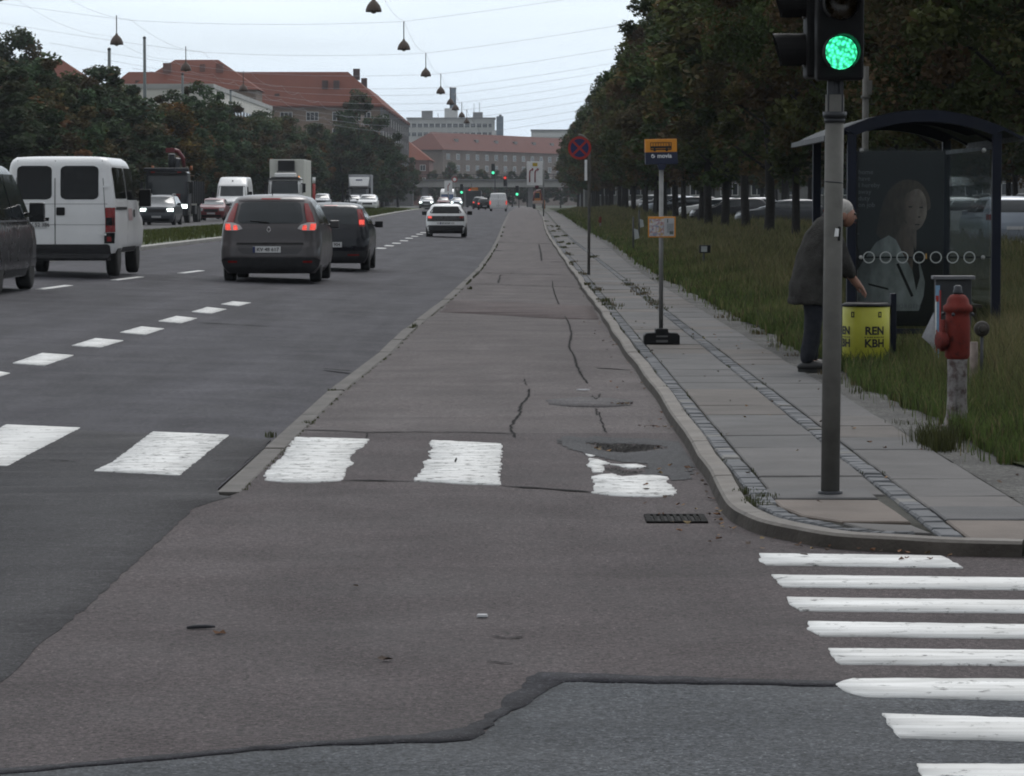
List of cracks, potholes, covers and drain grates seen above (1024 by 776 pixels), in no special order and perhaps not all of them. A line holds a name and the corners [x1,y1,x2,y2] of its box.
crack [495,242,607,432]
crack [303,379,530,438]
drain grate [644,514,708,523]
pothole [587,443,663,453]
